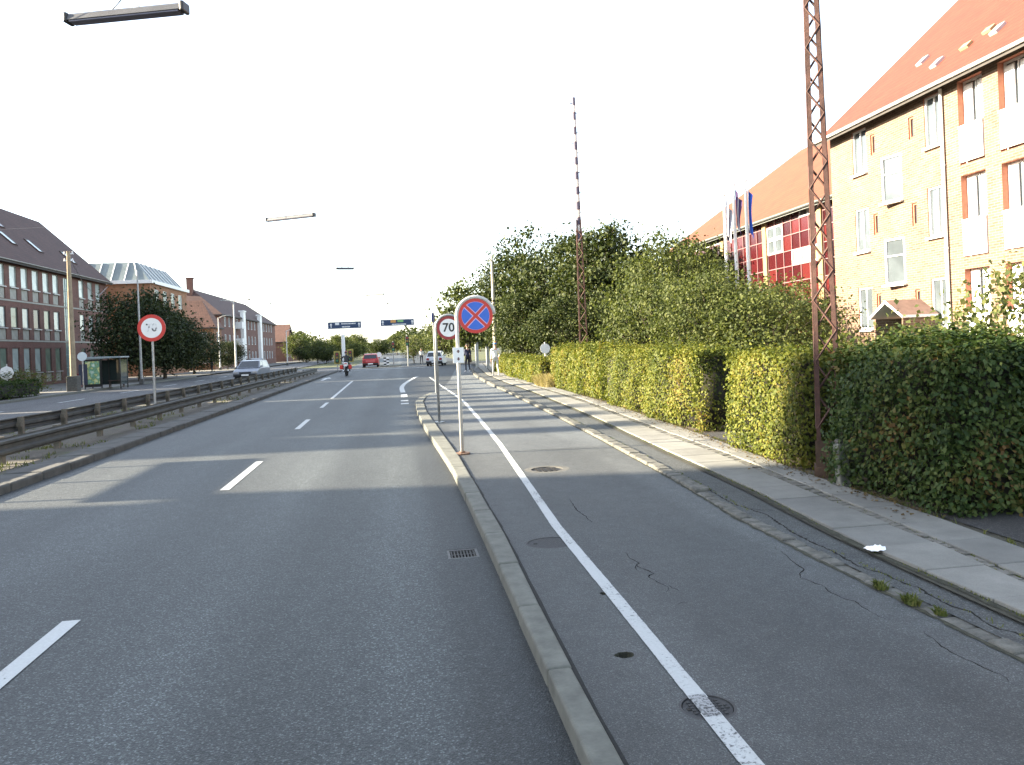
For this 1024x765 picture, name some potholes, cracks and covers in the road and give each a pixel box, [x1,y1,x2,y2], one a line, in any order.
crack [626,553,684,604]
drain grate [447,548,480,559]
manhole cover [678,694,737,720]
crack [710,490,1023,686]
manhole cover [526,537,577,548]
